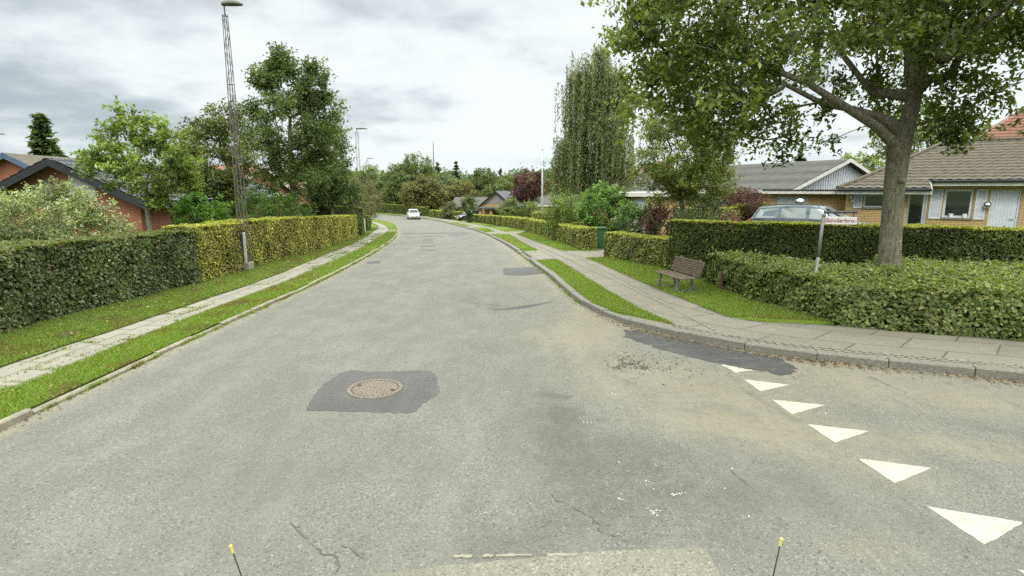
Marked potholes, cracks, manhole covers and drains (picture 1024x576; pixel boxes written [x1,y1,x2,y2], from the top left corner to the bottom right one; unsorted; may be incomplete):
manhole cover [346,379,403,399]
crack [550,493,620,536]
crack [290,522,362,574]
